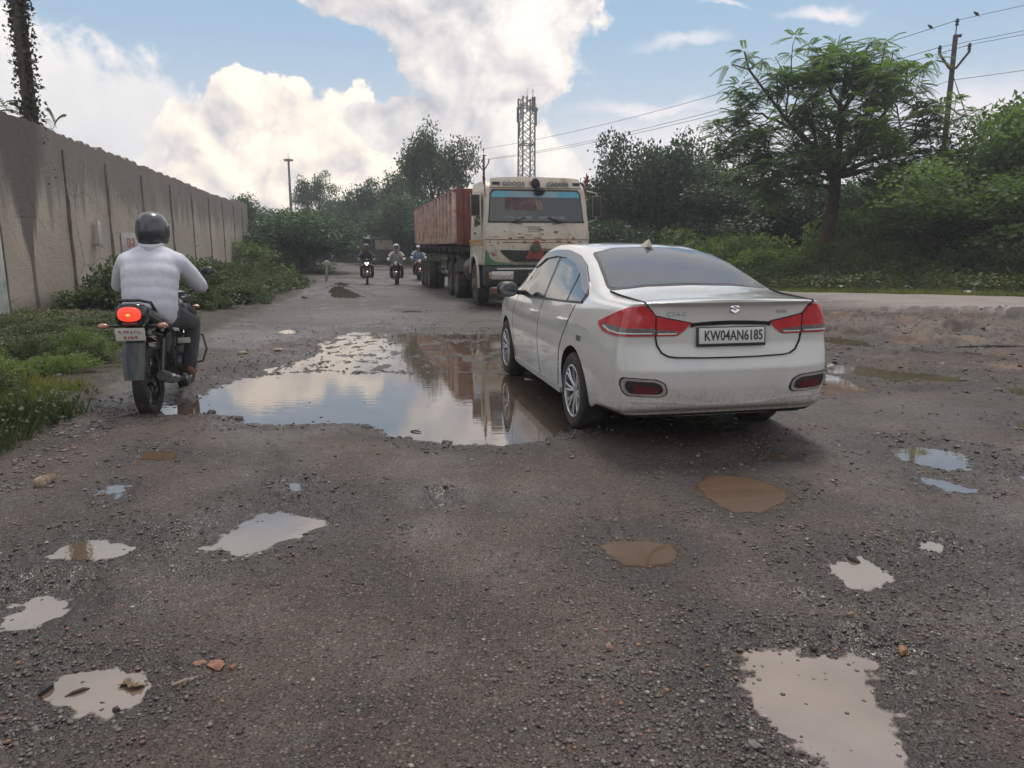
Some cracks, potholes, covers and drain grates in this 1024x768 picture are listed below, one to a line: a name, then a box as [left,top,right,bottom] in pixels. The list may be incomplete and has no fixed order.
pothole [240,326,532,376]
pothole [2,523,177,567]
pothole [869,437,1001,474]
pothole [0,573,108,641]
pothole [429,483,458,506]
pothole [820,372,892,396]
pothole [171,492,361,564]
pothole [904,469,997,495]
pothole [694,625,966,768]
pothole [583,531,704,578]
pothole [802,542,933,599]
pothole [0,643,194,733]
